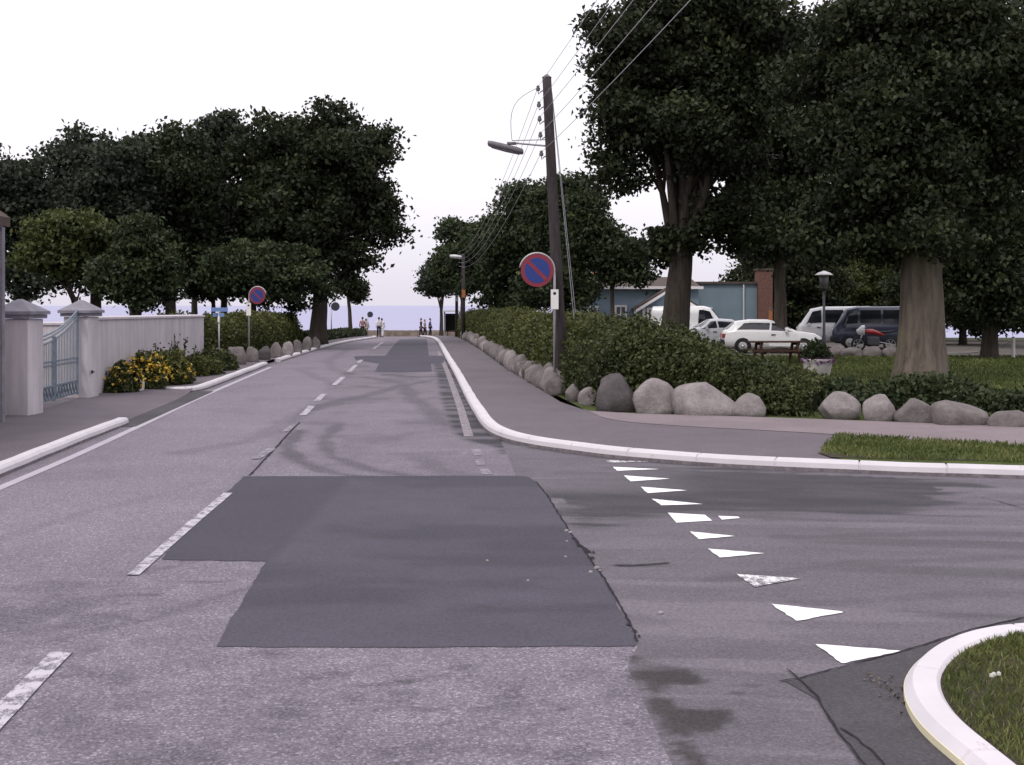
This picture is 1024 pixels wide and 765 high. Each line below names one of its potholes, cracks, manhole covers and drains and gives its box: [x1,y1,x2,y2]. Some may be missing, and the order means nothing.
crack [779,617,1024,765]
crack [535,481,669,642]
